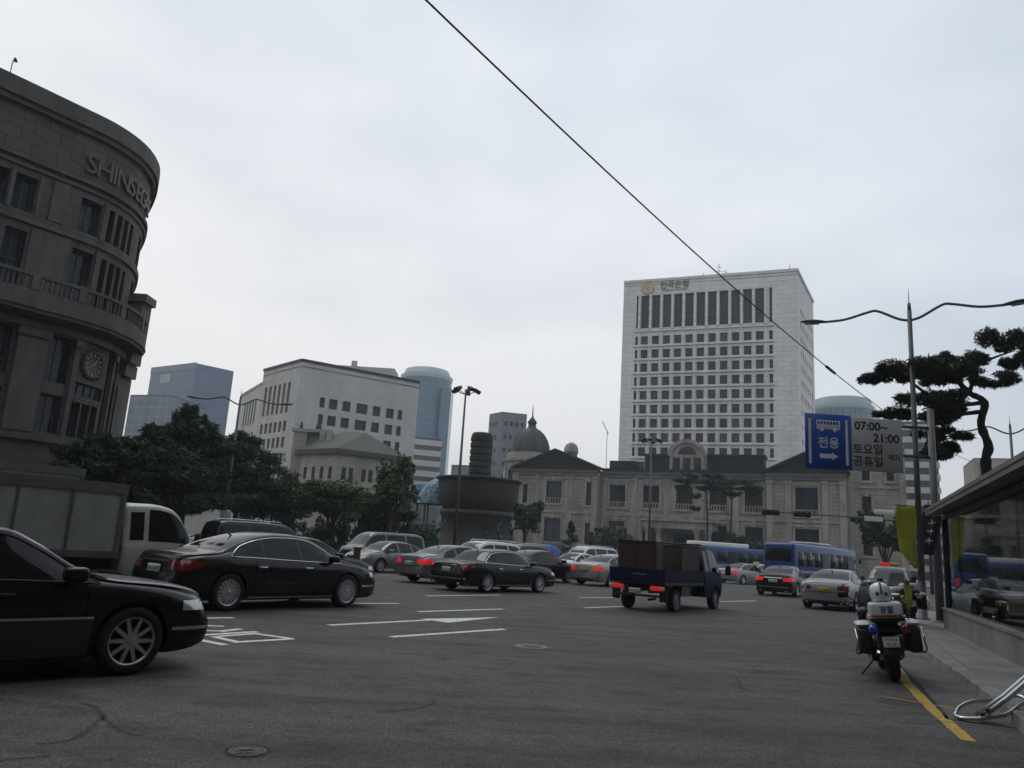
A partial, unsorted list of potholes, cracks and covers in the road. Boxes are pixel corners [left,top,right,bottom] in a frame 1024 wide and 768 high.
manhole cover [223,744,271,758]
crack [0,702,145,762]
crack [375,699,438,712]
